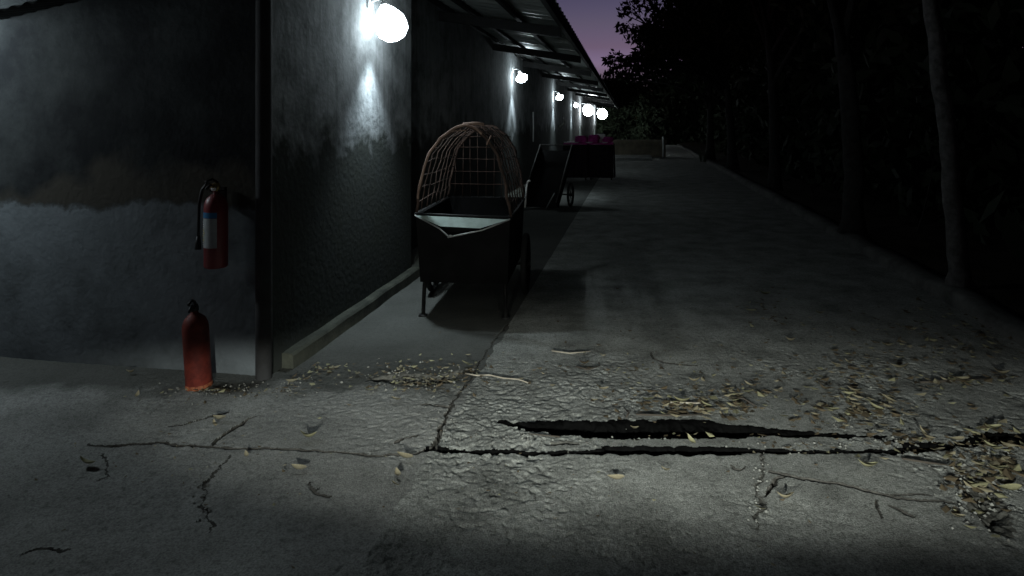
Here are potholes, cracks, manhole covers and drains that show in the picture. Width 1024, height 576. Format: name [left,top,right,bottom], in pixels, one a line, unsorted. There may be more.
crack [20,547,72,556]
crack [764,470,962,519]
crack [87,412,424,533]
